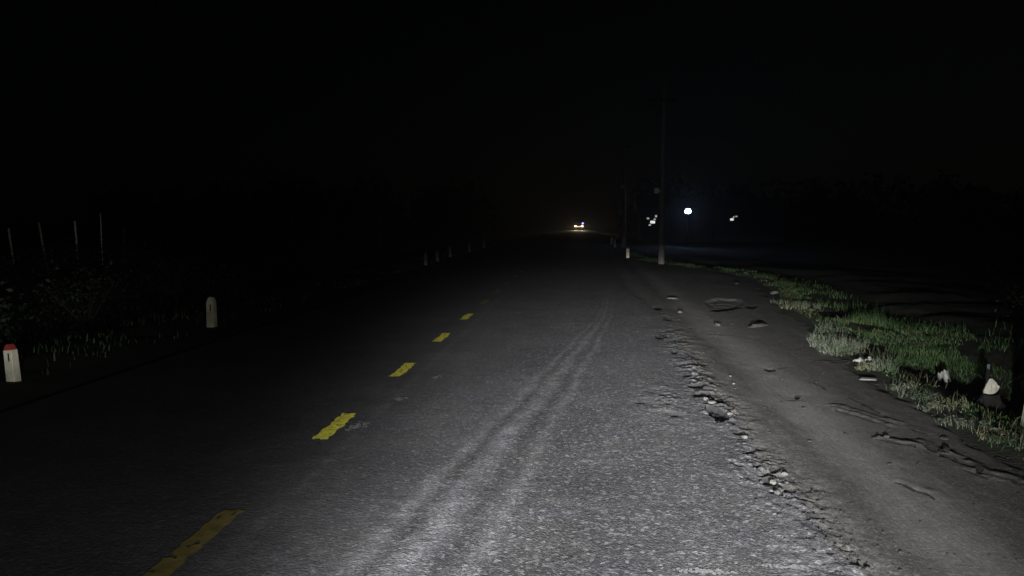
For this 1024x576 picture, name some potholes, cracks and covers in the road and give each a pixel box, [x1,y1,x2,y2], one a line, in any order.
crack [778,359,1024,500]
pothole [703,298,745,312]
pothole [704,404,730,422]
